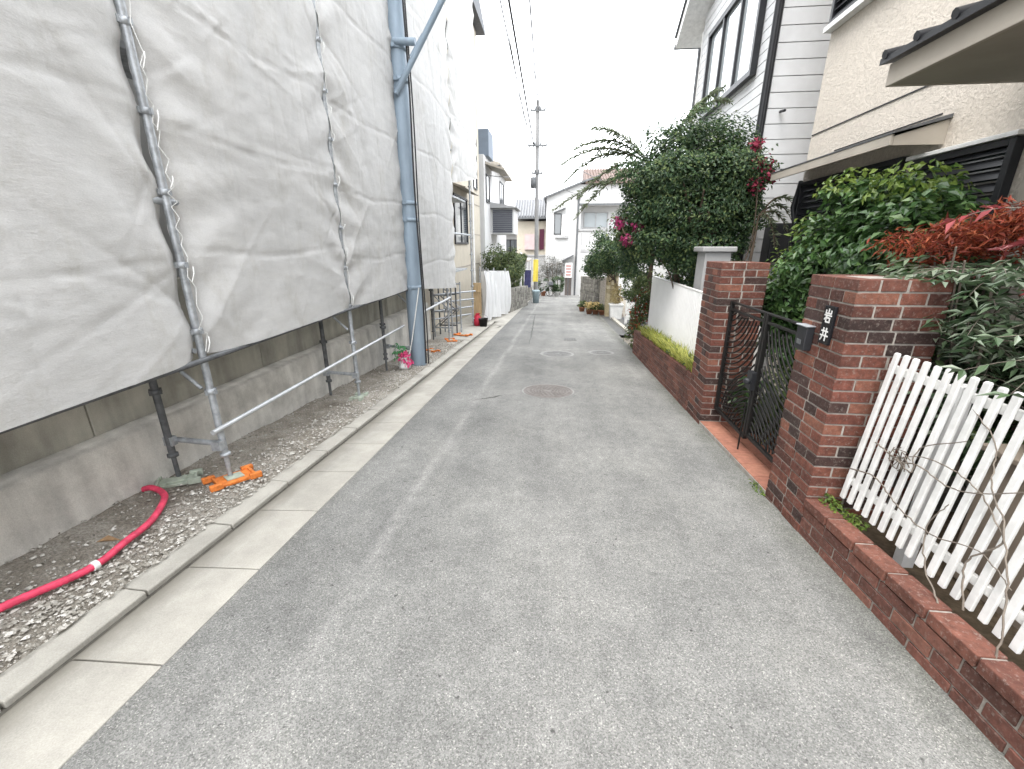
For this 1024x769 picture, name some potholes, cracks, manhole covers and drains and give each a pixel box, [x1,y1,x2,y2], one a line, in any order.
manhole cover [522,384,574,398]
